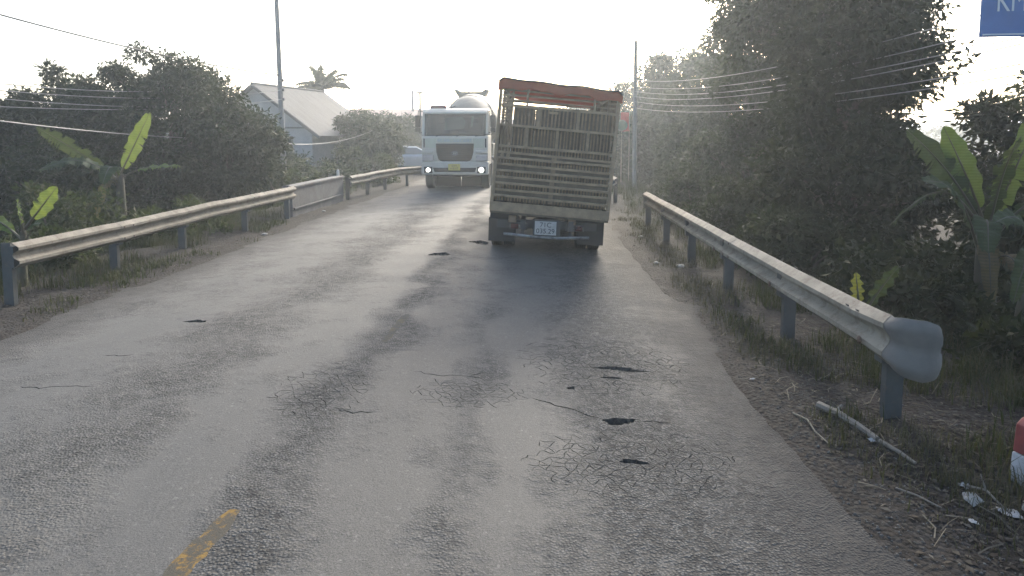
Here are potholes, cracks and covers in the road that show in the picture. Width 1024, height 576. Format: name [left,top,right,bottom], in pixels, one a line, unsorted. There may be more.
crack [521,419,746,501]
crack [268,360,371,421]
crack [518,337,697,397]
crack [410,371,525,408]
